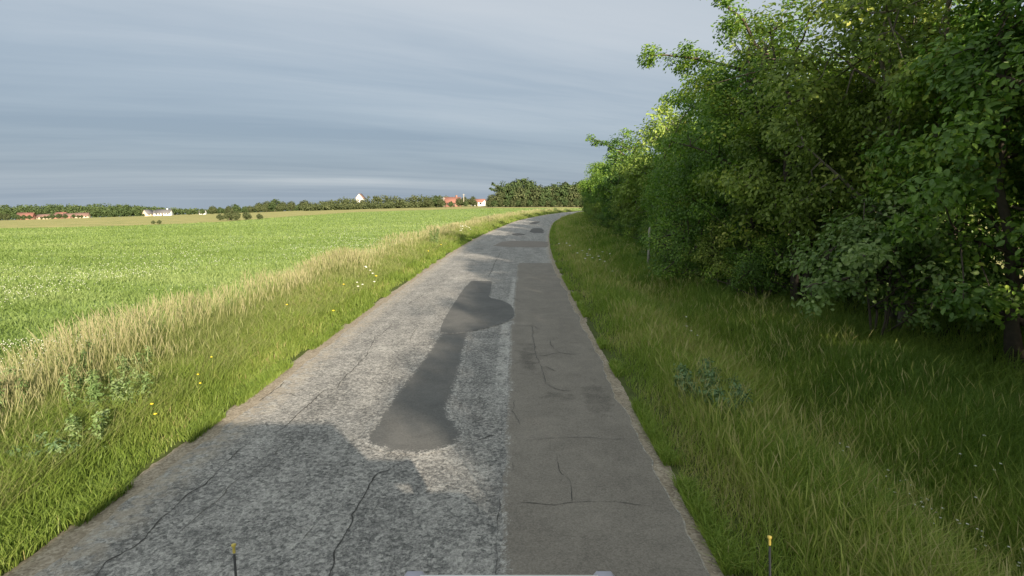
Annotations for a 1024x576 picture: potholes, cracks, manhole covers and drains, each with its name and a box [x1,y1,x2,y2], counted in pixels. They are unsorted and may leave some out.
crack [523,437,651,506]
crack [96,445,281,575]
crack [518,325,580,391]
crack [257,324,392,432]
crack [329,468,392,576]
